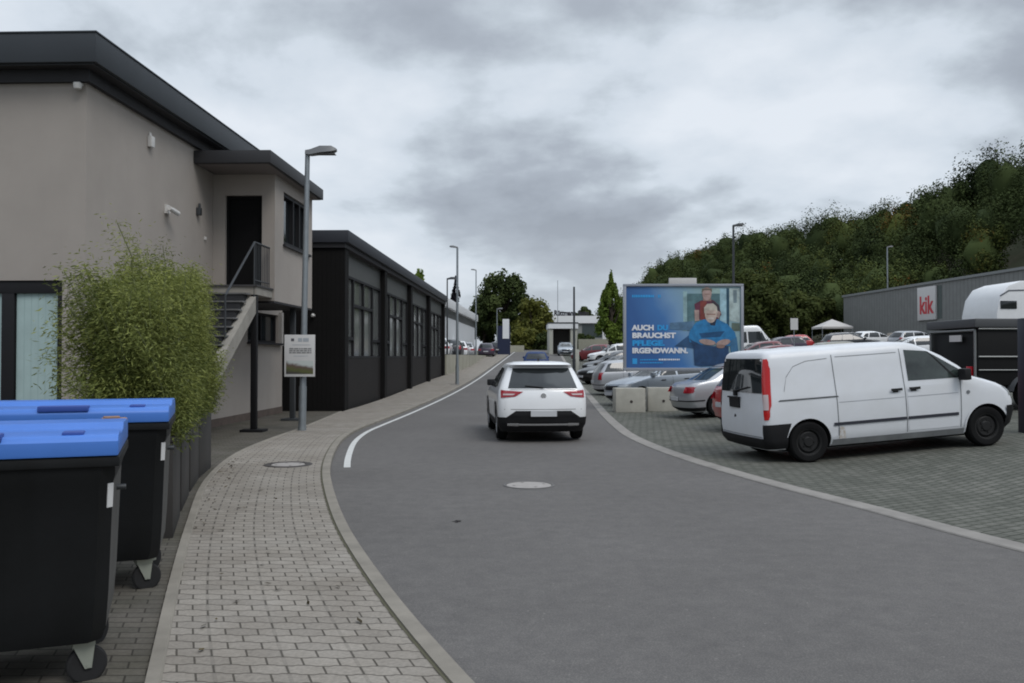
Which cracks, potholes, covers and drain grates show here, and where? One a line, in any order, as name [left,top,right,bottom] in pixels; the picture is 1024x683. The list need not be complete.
manhole cover [503,481,555,489]
